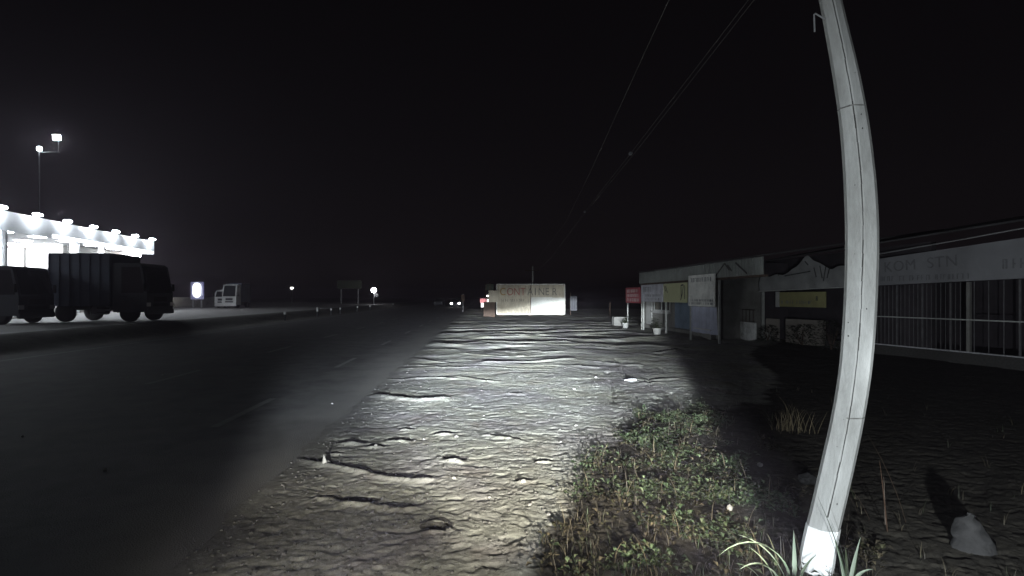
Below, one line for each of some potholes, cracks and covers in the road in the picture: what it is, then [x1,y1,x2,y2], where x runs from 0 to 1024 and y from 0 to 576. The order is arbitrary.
pothole [420,521,453,531]
crack [381,333,564,398]
crack [304,451,417,478]
